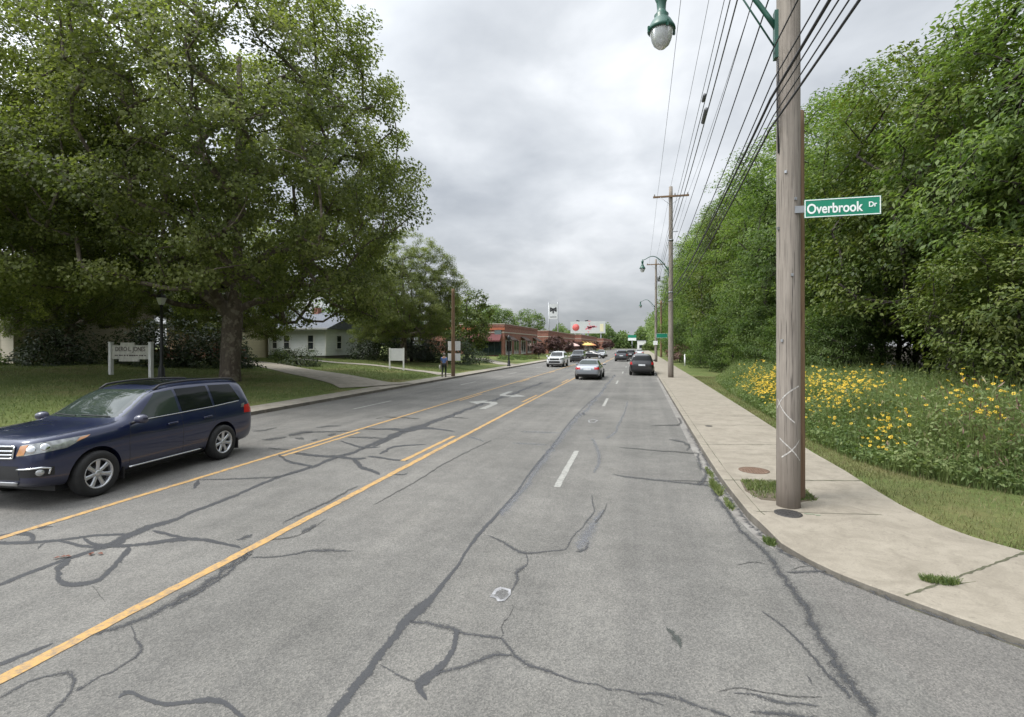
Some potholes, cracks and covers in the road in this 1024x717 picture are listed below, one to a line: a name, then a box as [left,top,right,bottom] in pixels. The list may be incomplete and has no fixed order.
manhole cover [774,509,803,518]
crack [594,403,709,486]
crack [1,520,345,717]
crack [193,472,297,489]
crack [252,417,492,504]
crack [383,495,820,717]
